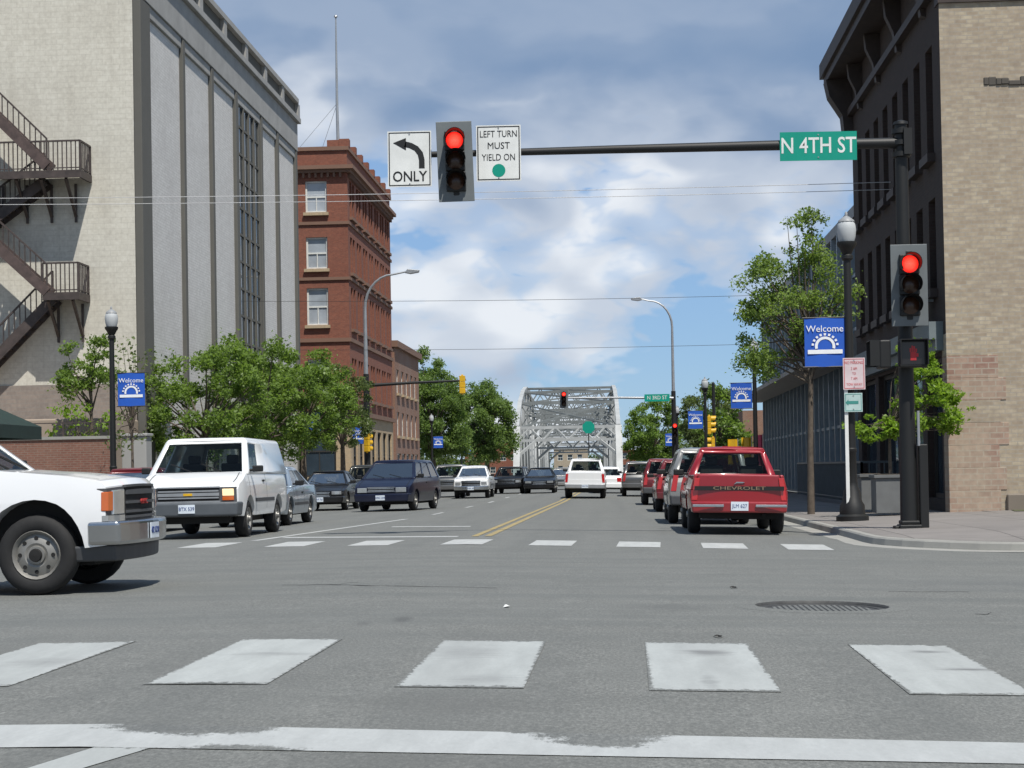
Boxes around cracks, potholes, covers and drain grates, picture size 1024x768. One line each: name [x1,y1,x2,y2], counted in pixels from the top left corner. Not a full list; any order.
manhole cover [734,600,911,614]
